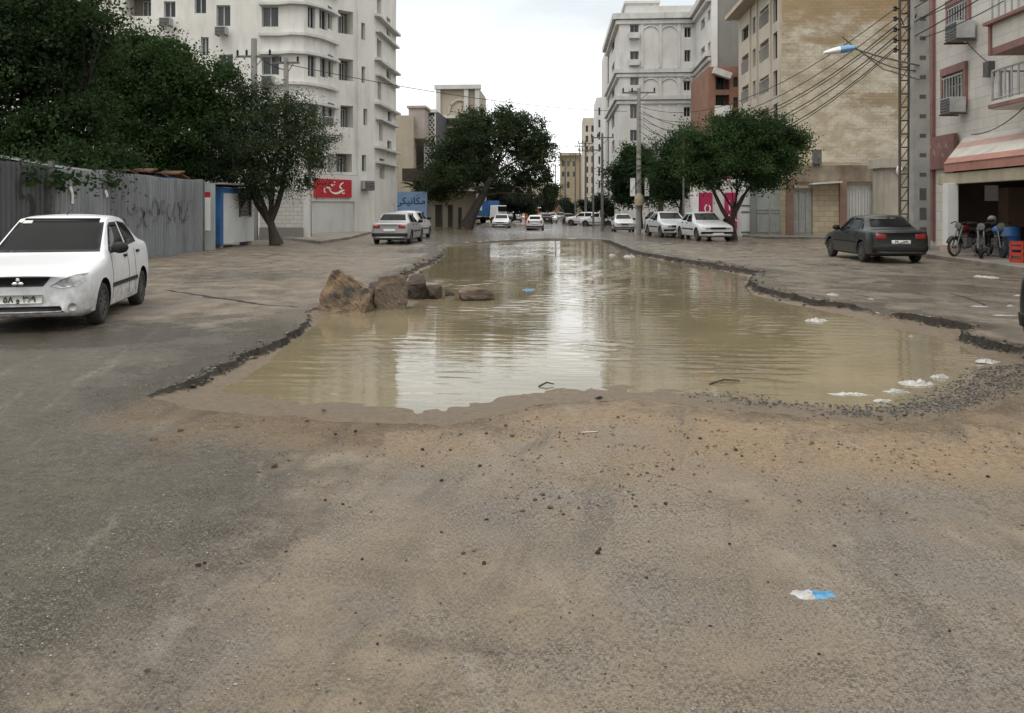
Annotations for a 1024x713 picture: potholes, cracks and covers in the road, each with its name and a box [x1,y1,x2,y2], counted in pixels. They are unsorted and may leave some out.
crack [167,290,298,308]
pothole [148,238,1024,426]
